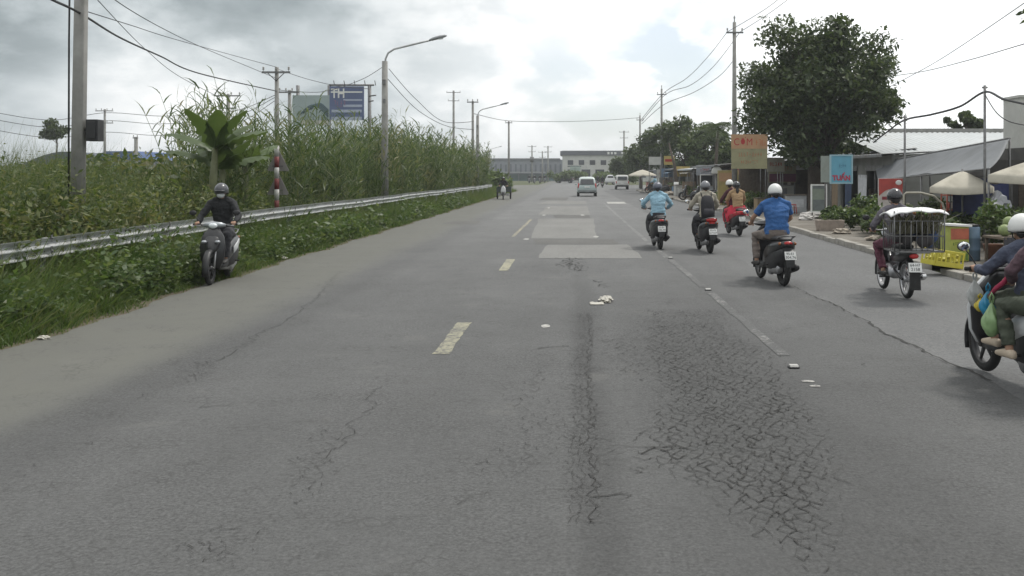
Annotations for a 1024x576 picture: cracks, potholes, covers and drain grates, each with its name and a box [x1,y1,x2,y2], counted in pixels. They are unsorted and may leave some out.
crack [554,313,693,523]
crack [167,518,274,571]
crack [603,298,857,572]
crack [290,386,383,504]
crack [556,257,610,288]
crack [172,279,332,382]
